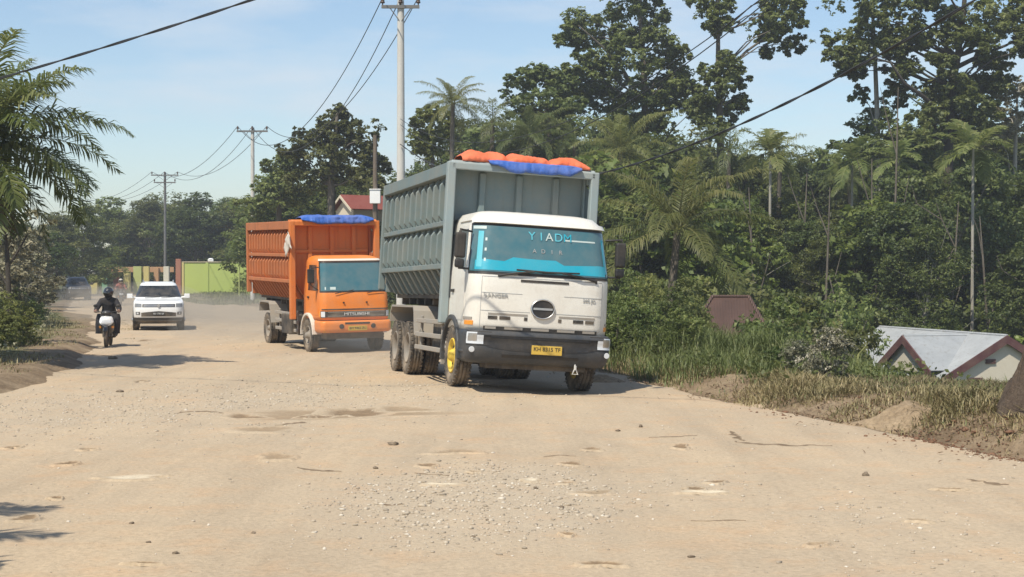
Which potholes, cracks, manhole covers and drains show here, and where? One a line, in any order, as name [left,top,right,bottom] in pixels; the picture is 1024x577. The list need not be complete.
pothole [3,514,46,523]
pothole [570,560,634,568]
crack [728,431,832,447]
pothole [669,443,691,451]
pothole [311,407,398,418]
pothole [254,451,301,463]
